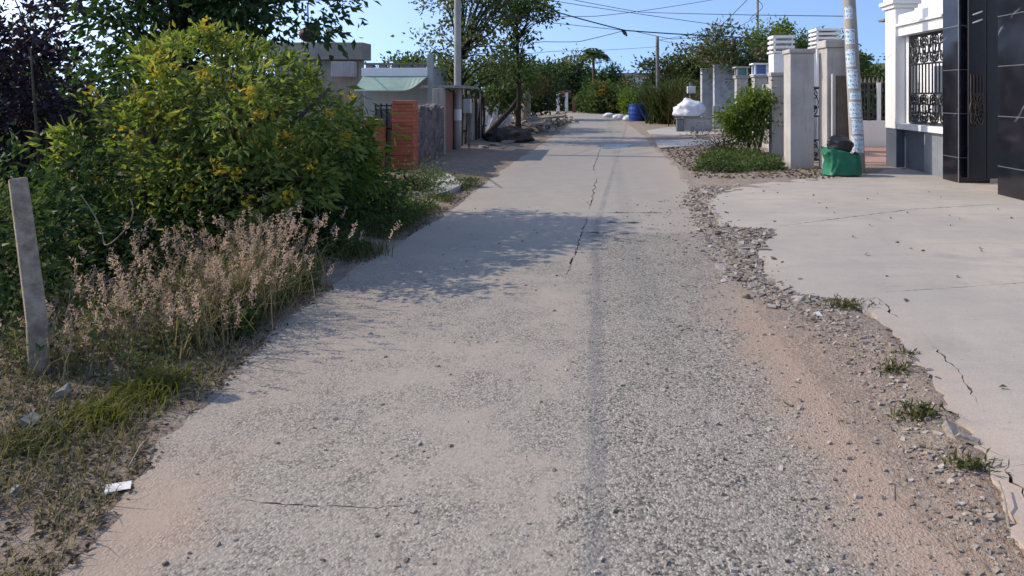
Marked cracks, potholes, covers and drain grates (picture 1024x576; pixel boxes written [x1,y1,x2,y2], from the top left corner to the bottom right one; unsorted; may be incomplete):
crack [980,446,1024,497]
crack [226,497,404,509]
crack [565,148,631,277]
crack [928,341,977,401]
